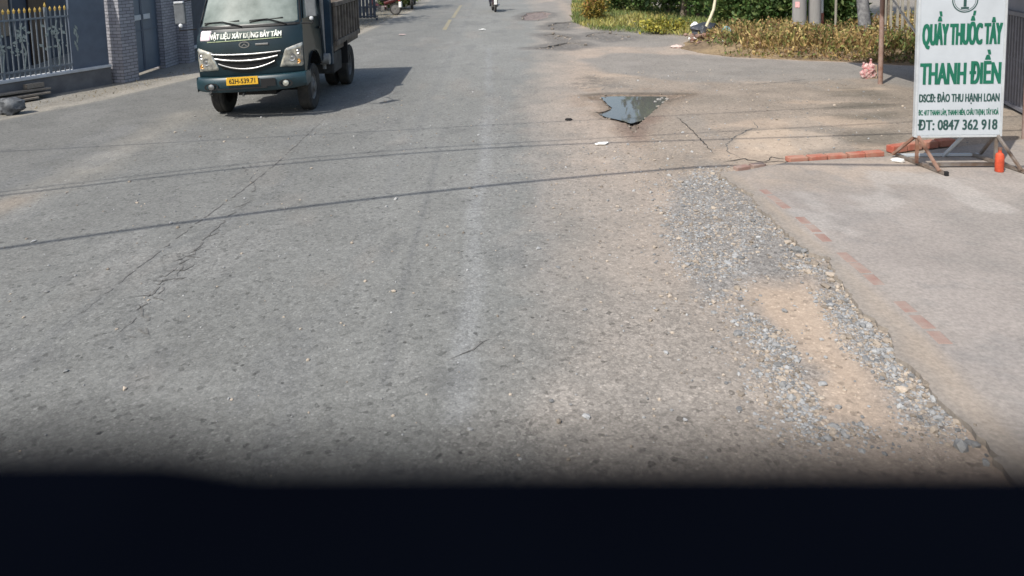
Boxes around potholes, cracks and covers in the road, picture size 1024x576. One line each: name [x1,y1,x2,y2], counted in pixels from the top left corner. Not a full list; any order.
pothole [544,32,572,41]
crack [677,117,787,163]
crack [49,121,322,338]
pothole [588,93,693,133]
